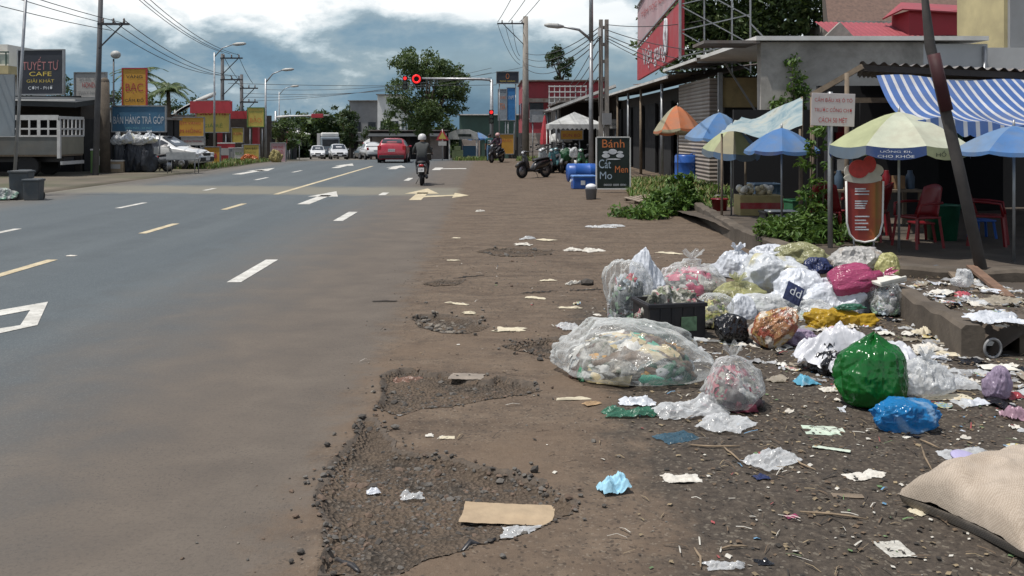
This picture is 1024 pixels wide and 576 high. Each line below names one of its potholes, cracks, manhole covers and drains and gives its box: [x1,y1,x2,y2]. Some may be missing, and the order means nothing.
pothole [289,413,607,576]
pothole [365,364,554,416]
pothole [479,245,555,257]
pothole [493,335,590,363]
pothole [423,279,470,287]
pothole [405,310,498,335]
